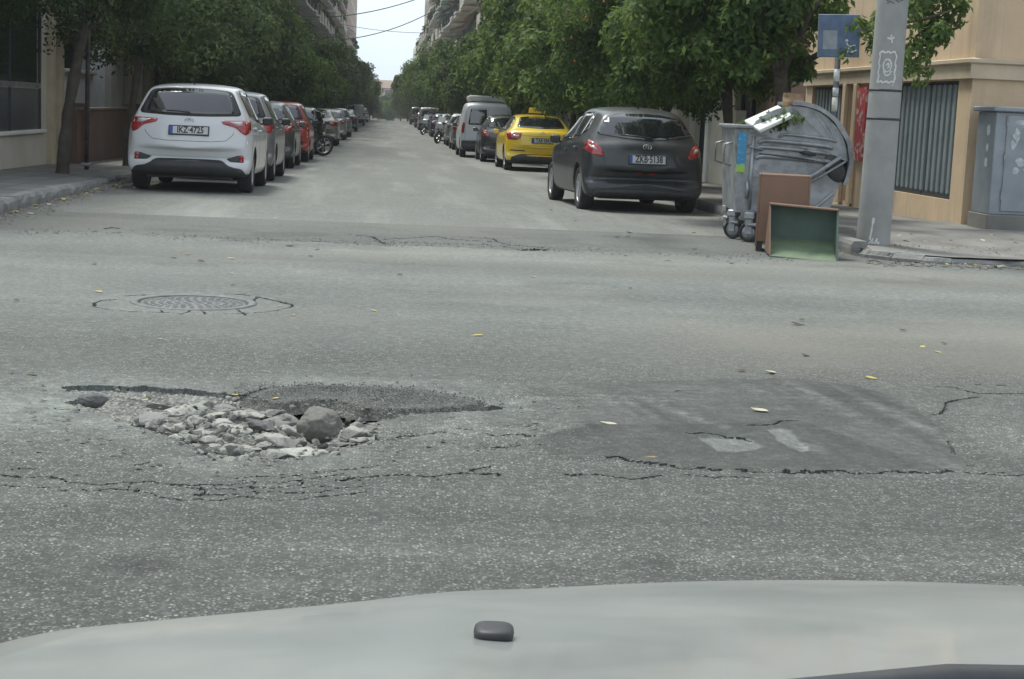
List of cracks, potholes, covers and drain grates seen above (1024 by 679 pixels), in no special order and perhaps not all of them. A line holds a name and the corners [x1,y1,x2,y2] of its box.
crack [562,441,1024,480]
crack [0,431,542,501]
crack [92,294,294,315]
crack [931,384,1024,415]
manhole cover [129,294,257,312]
pothole [61,385,504,461]
